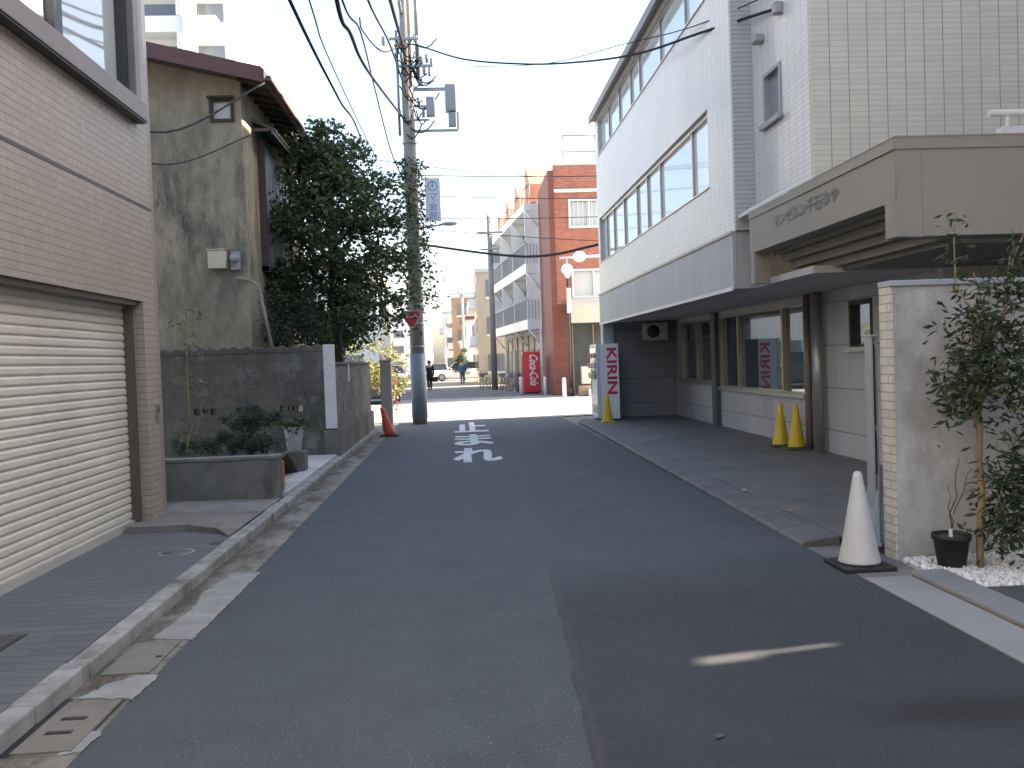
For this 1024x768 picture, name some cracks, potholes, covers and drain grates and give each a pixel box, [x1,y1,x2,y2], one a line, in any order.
utility cover [0,634,28,652]
manhole cover [157,548,196,556]
